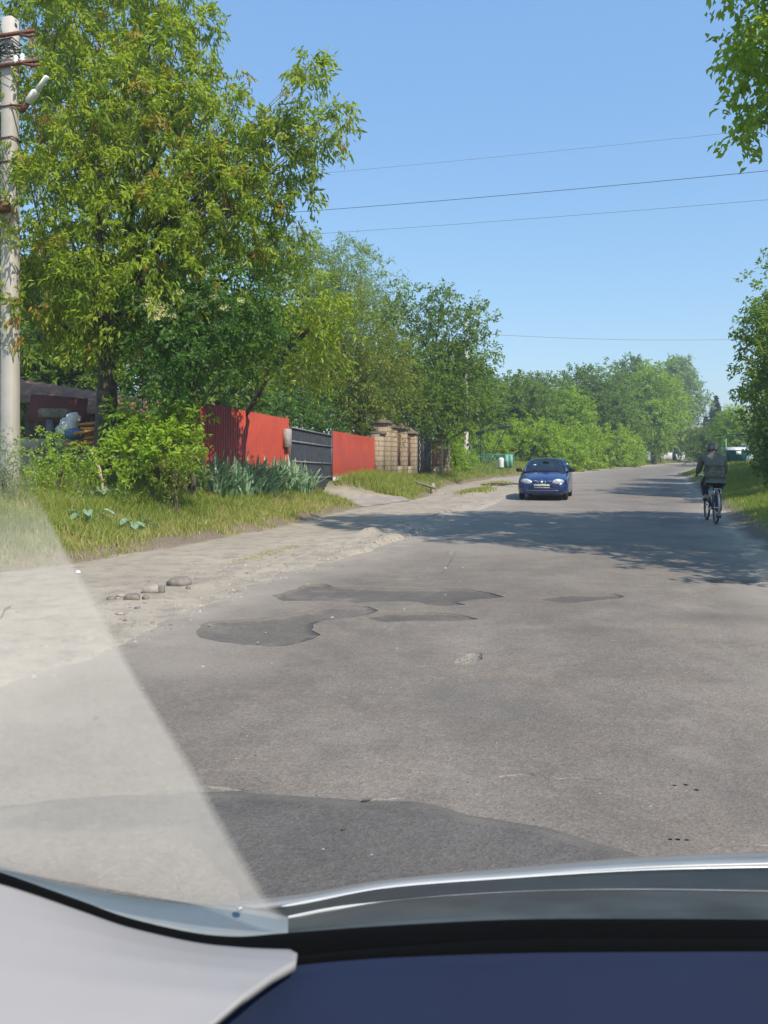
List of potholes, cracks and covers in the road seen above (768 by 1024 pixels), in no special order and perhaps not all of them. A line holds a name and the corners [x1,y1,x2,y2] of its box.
pothole [452,653,483,665]
